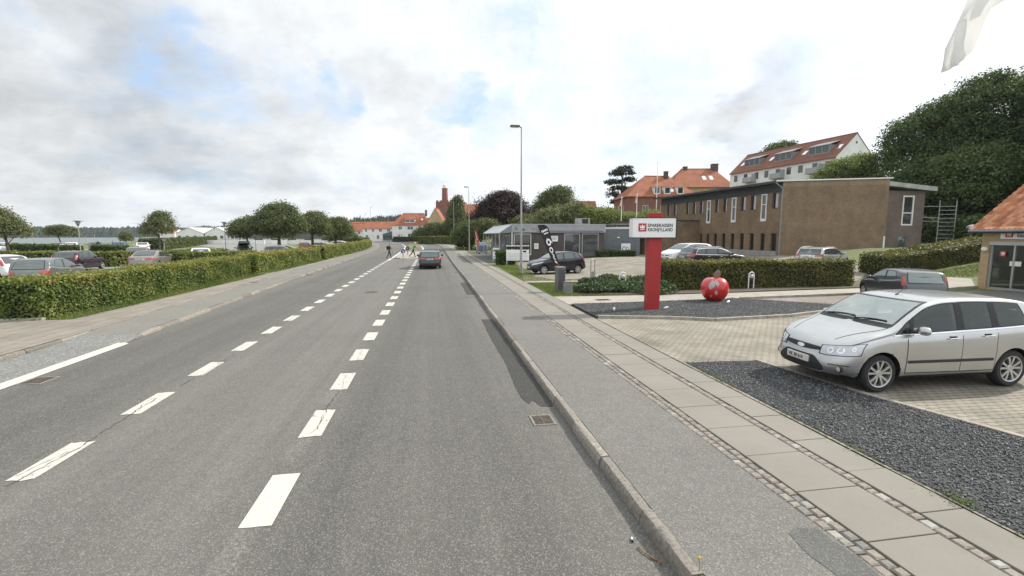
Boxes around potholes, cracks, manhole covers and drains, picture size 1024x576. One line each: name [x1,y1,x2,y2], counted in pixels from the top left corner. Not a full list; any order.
drain grate [529,414,557,426]
drain grate [15,376,60,385]
